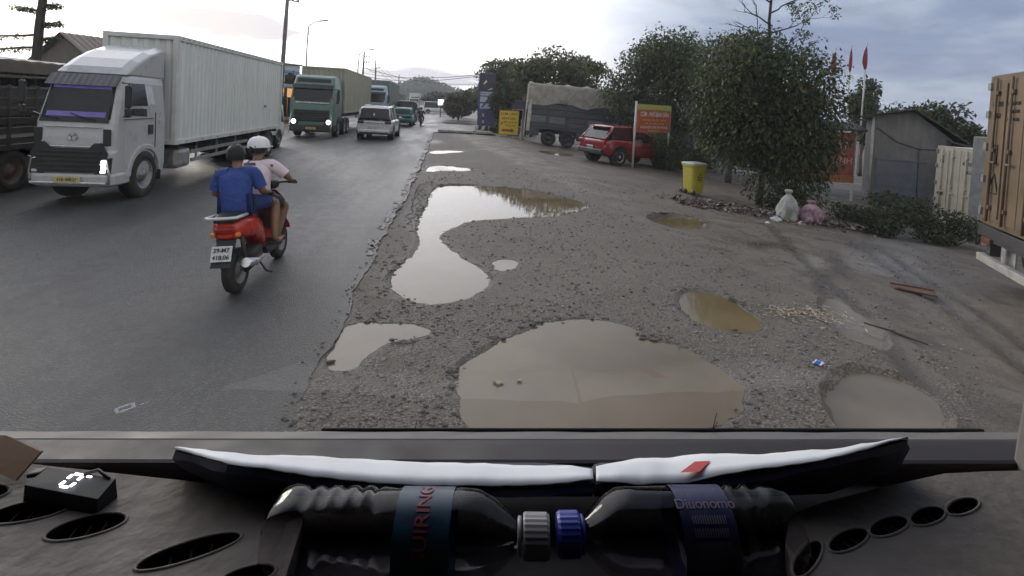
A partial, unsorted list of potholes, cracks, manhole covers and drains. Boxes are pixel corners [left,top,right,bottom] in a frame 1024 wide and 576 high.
pothole [646,211,708,229]
pothole [434,313,761,428]
pothole [669,286,774,337]
pothole [315,315,444,373]
pothole [384,183,591,305]
